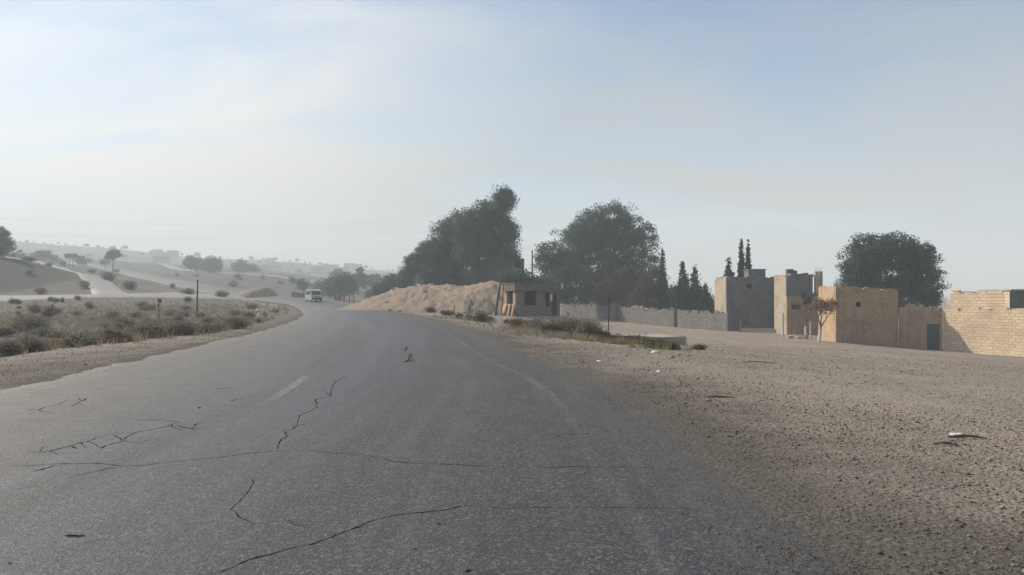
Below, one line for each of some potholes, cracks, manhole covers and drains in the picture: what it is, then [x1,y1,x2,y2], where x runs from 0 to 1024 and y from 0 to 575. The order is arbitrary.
crack [231,478,259,527]
crack [206,505,677,574]
crack [18,375,493,477]
